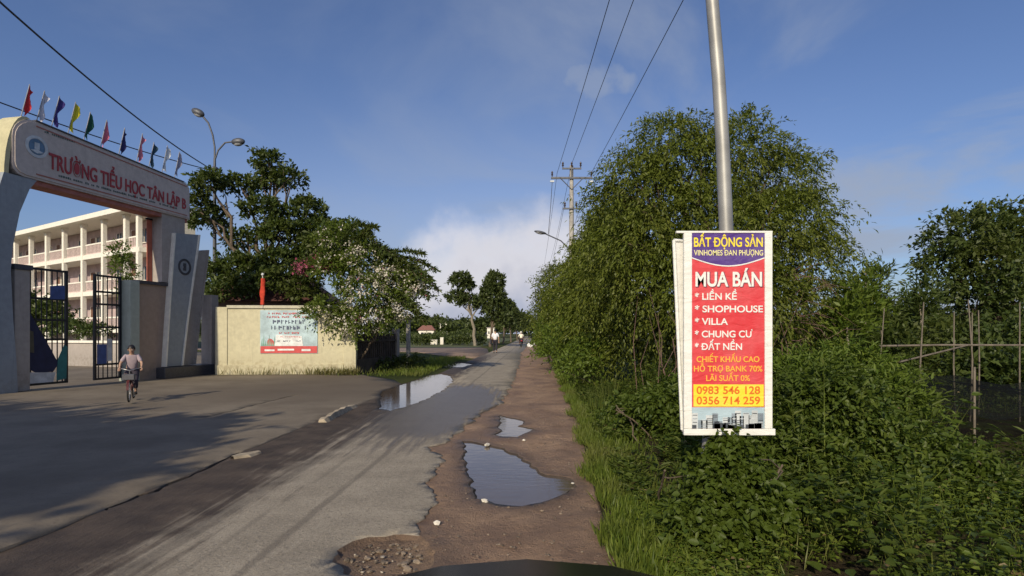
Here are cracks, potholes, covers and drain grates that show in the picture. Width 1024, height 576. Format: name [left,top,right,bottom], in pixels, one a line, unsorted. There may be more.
pothole [378,374,453,411]
pothole [332,534,436,576]
pothole [494,415,533,437]
pothole [462,441,578,506]
